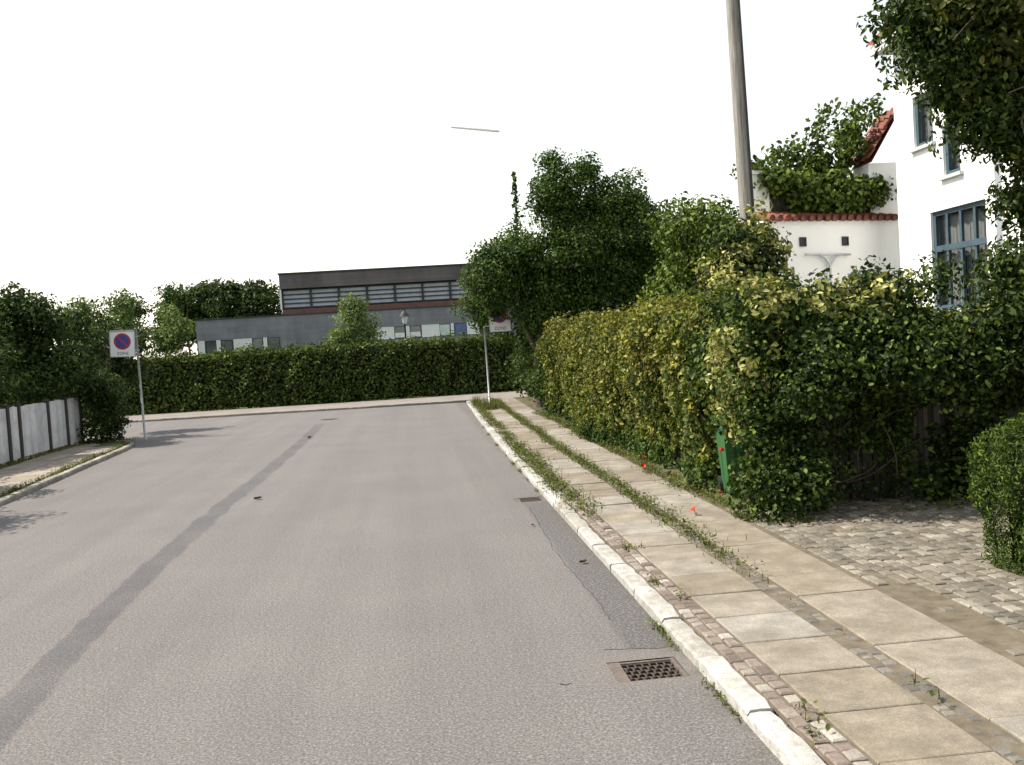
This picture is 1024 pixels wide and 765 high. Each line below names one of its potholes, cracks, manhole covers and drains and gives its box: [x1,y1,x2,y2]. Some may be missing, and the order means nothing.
drain grate [607,657,689,683]
